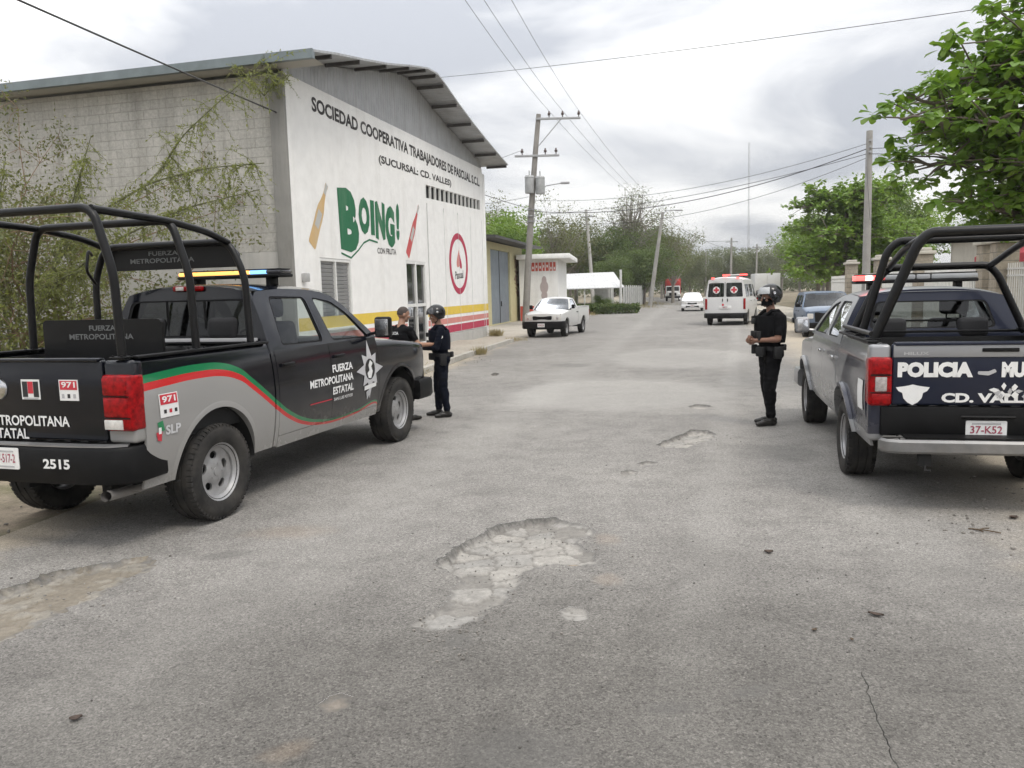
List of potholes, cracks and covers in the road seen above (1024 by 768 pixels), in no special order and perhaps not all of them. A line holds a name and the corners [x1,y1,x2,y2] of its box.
crack [861,672,899,768]
pothole [408,517,599,631]
pothole [656,429,716,448]
